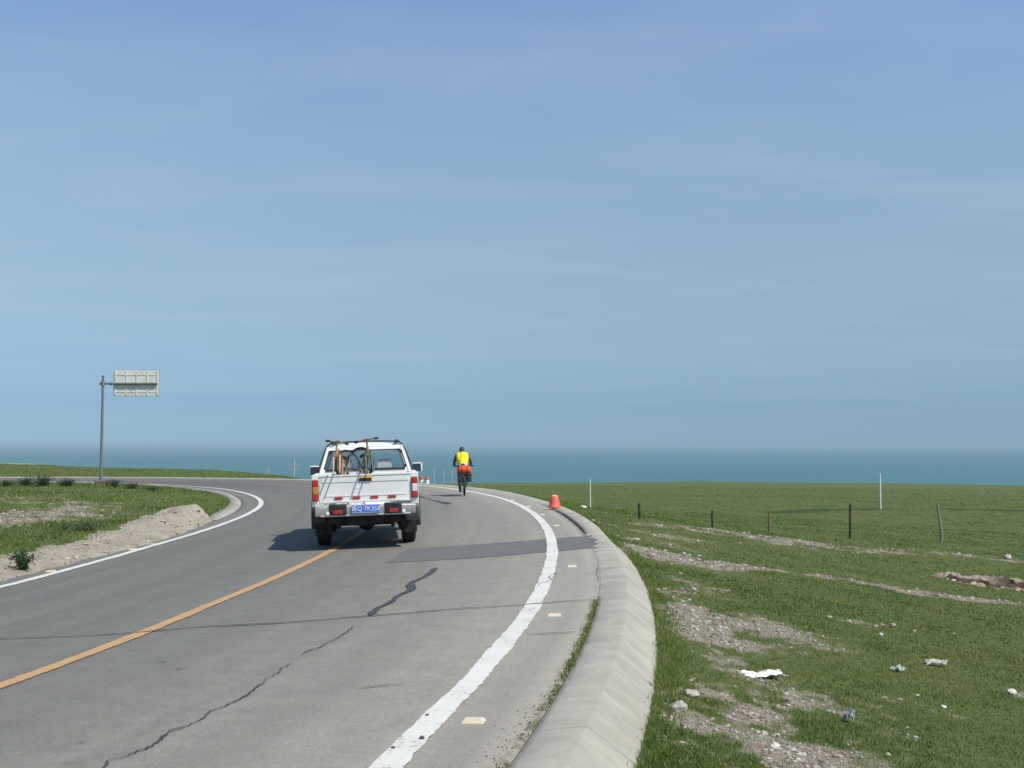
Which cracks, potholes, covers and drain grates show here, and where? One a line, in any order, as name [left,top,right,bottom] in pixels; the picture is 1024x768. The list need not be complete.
crack [18,571,588,768]
